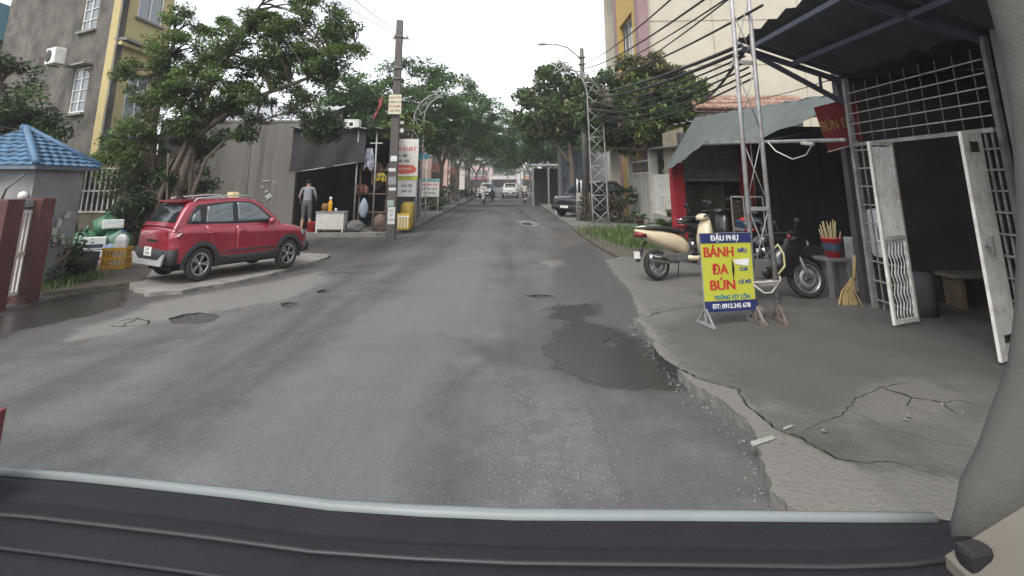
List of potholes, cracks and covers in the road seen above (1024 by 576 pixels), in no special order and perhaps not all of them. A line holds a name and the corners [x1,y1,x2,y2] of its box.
pothole [169,312,220,324]
crack [646,291,983,478]
crack [111,318,150,327]
